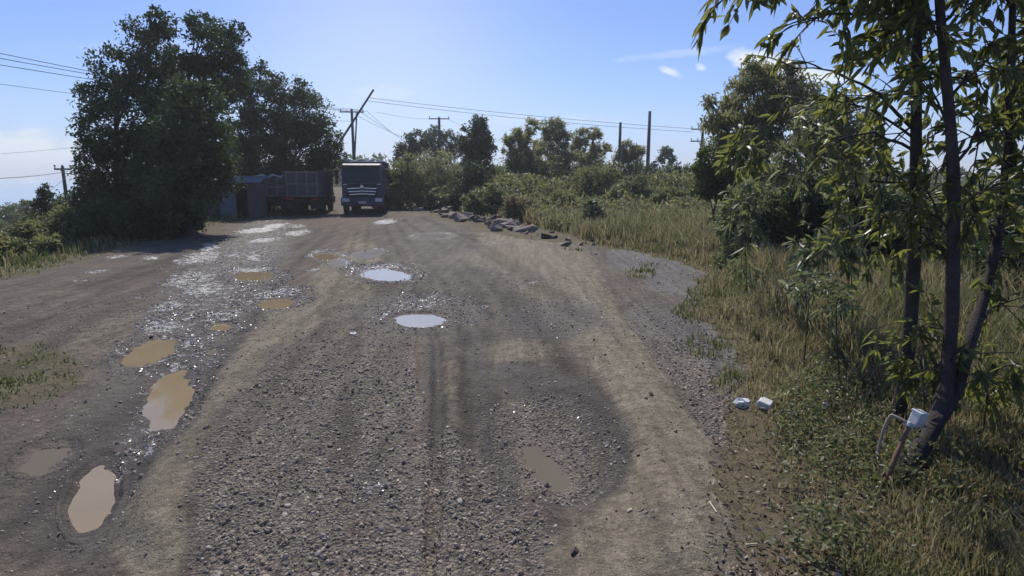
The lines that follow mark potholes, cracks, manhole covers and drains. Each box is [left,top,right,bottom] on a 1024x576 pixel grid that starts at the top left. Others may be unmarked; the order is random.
pothole [5,436,82,480]
pothole [379,308,461,329]
pothole [348,266,423,283]
pothole [508,429,584,500]
pothole [133,351,205,440]
pothole [307,251,347,261]
pothole [55,444,131,546]
pothole [202,319,241,332]
pothole [107,329,191,372]
pothole [221,268,287,283]
pothole [246,294,306,311]
